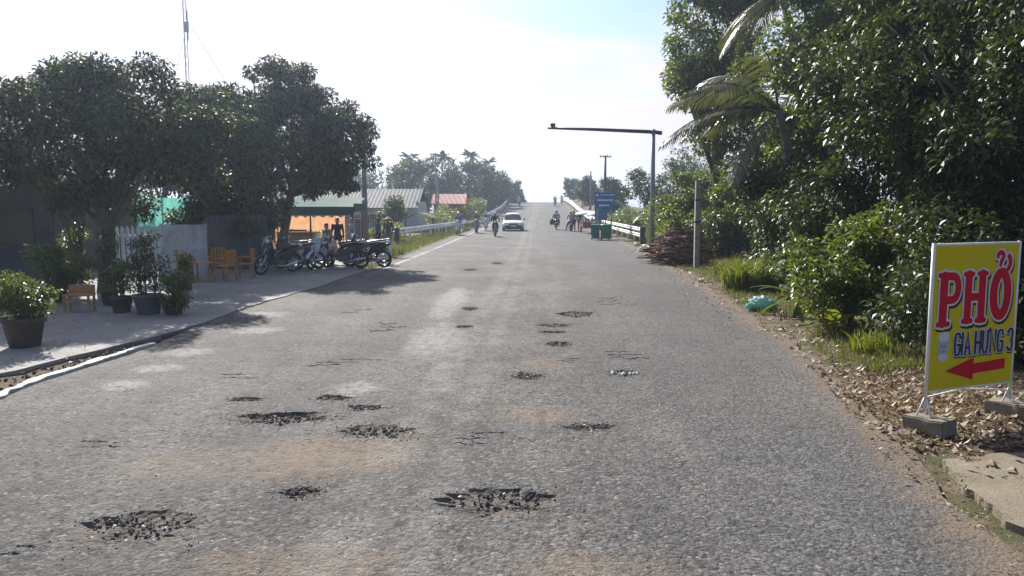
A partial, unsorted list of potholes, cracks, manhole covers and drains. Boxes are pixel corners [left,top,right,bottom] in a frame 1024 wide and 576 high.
pothole [216,409,344,430]
pothole [327,421,424,441]
pothole [43,505,216,560]
pothole [500,370,547,380]
pothole [403,483,585,525]
pothole [265,486,327,500]
pothole [310,393,352,402]
pothole [606,369,645,378]
pothole [554,421,624,433]
pothole [340,404,393,412]
